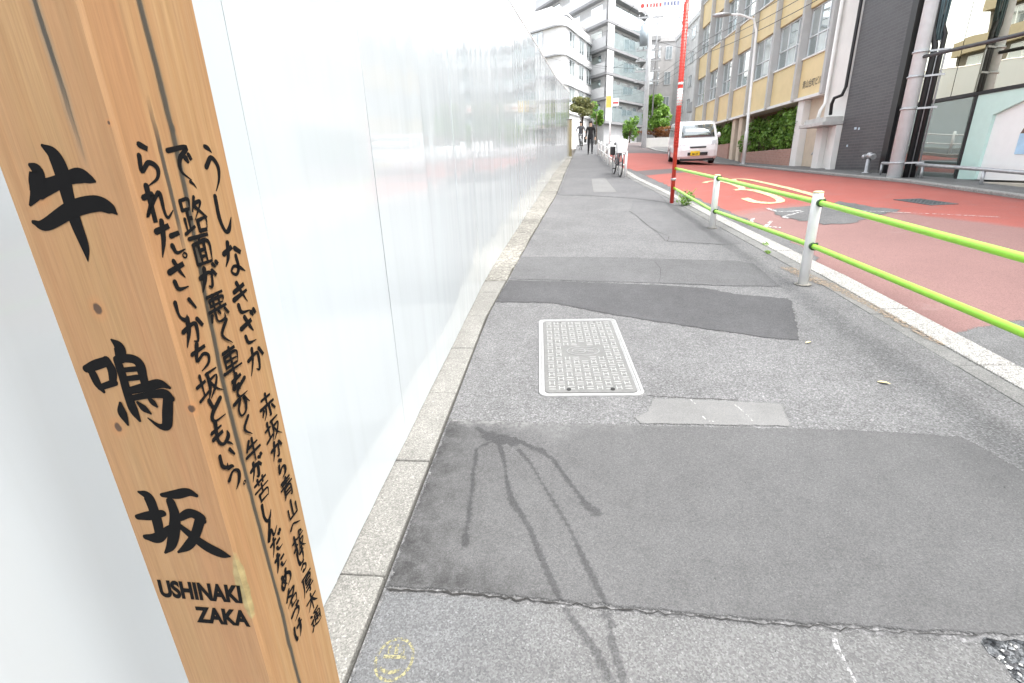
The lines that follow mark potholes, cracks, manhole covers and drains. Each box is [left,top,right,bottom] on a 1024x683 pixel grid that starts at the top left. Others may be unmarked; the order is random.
manhole cover [539,318,644,397]
pothole [980,637,1024,683]
